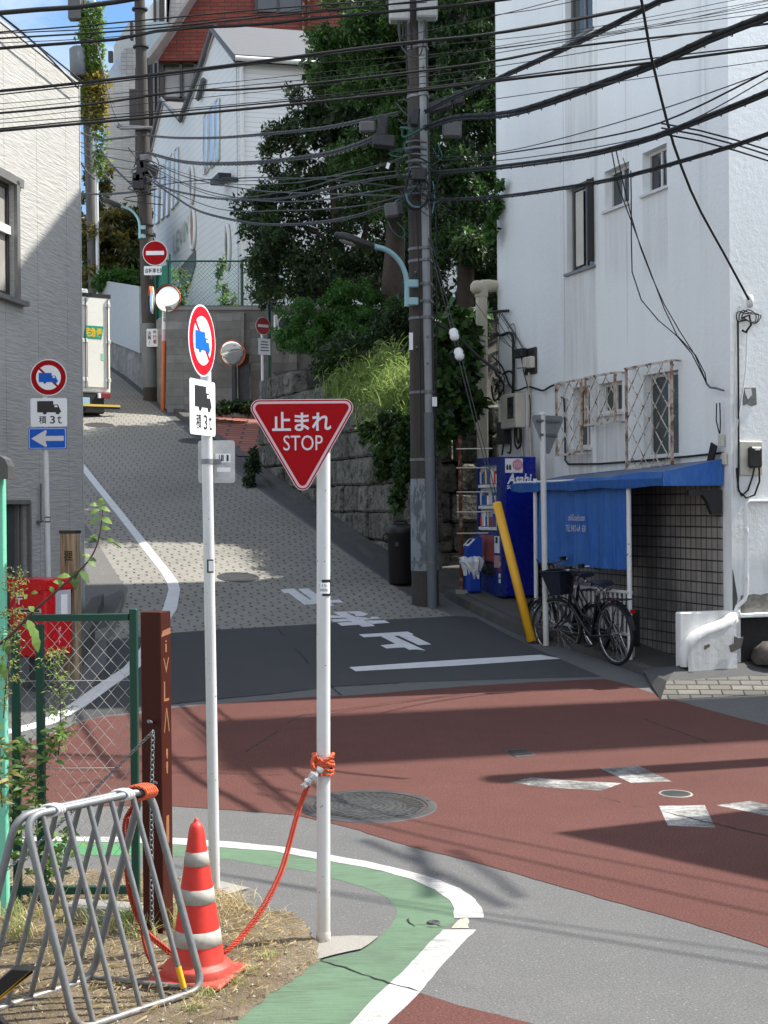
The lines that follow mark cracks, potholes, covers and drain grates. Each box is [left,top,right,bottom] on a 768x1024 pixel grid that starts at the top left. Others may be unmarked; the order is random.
manhole cover [301,790,437,823]
manhole cover [658,790,693,798]
crack [321,960,418,991]
manhole cover [217,572,260,582]
